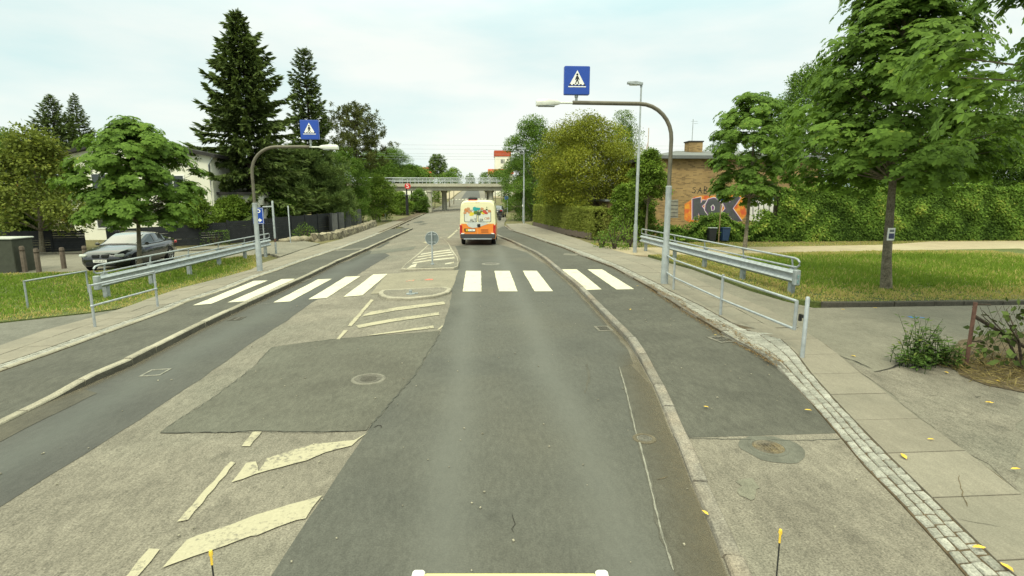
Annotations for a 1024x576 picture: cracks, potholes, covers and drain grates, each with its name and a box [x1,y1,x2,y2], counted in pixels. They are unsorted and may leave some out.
manhole cover [747,438,790,456]
drain grate [707,335,735,343]
manhole cover [138,368,172,377]
manhole cover [351,373,386,385]
manhole cover [632,433,656,444]
